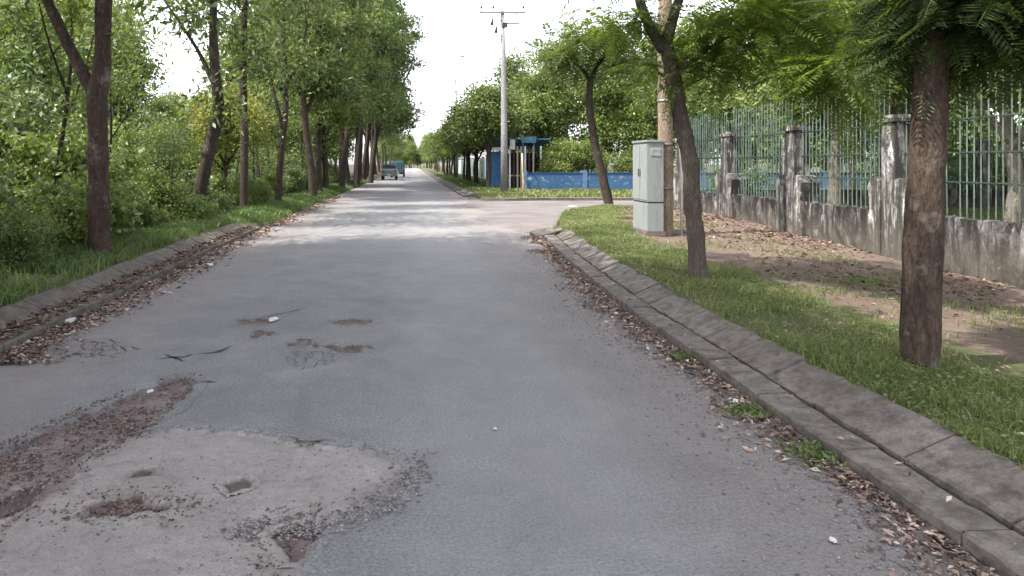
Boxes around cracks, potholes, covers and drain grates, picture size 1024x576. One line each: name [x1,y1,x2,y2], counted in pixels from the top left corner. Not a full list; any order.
crack [77,338,138,357]
pothole [0,370,208,518]
pothole [274,335,324,349]
pothole [230,316,284,326]
crack [286,351,333,367]
pothole [320,317,385,327]
pothole [242,327,283,340]
pothole [313,341,389,355]
